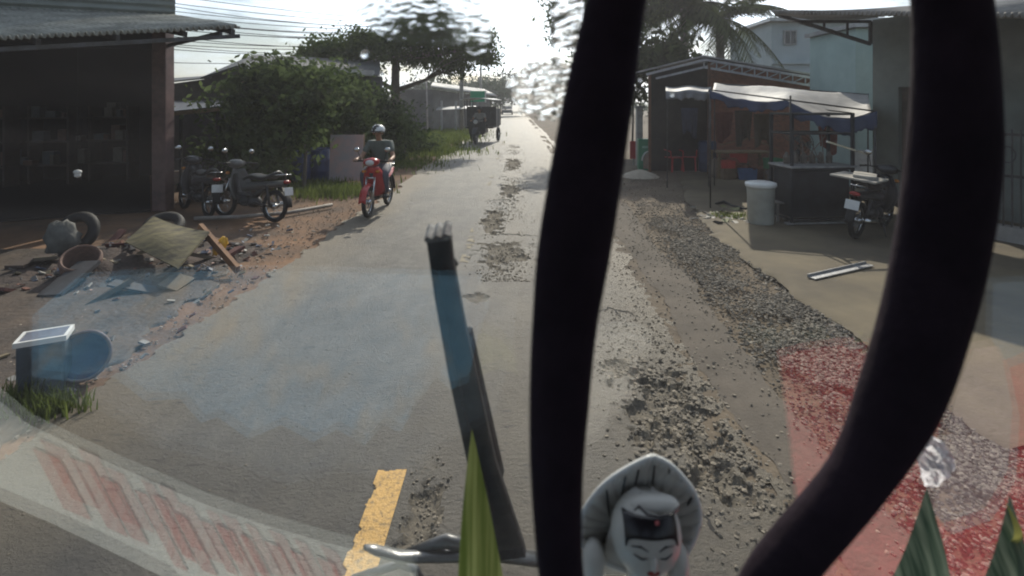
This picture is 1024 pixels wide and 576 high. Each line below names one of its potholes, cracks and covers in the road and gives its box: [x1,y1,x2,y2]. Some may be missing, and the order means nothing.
pothole [391,485,448,550]
pothole [504,159,523,170]
pothole [601,358,645,379]
pothole [684,447,764,508]
pothole [621,369,742,468]
pothole [500,184,522,198]
pothole [479,210,506,235]
pothole [477,241,530,272]
pothole [462,292,490,304]
